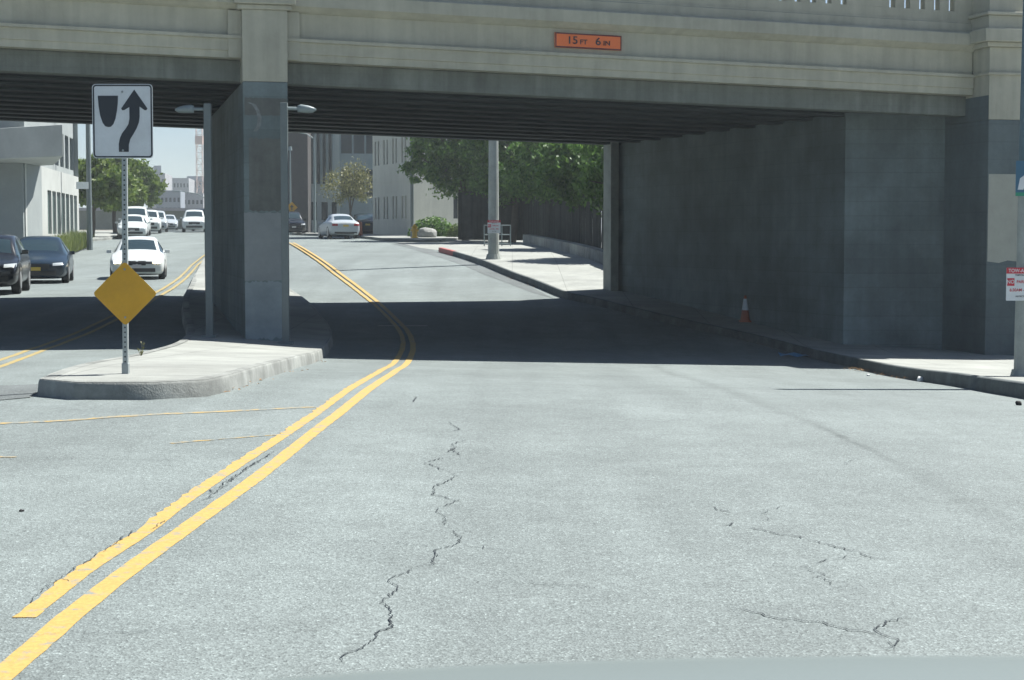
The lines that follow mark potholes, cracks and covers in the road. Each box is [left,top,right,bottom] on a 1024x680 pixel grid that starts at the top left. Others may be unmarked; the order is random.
crack [734,608,900,649]
crack [322,422,507,660]
crack [199,451,274,502]
crack [715,506,875,584]
crack [30,520,165,602]
